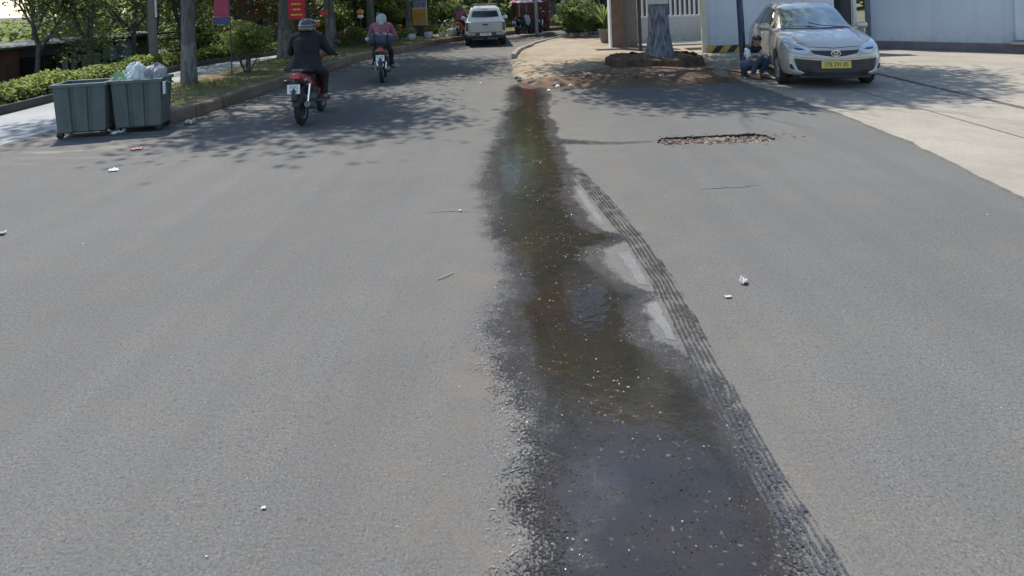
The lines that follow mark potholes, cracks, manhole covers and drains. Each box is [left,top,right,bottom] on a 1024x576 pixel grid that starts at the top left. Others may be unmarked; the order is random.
pothole [657,133,776,146]
